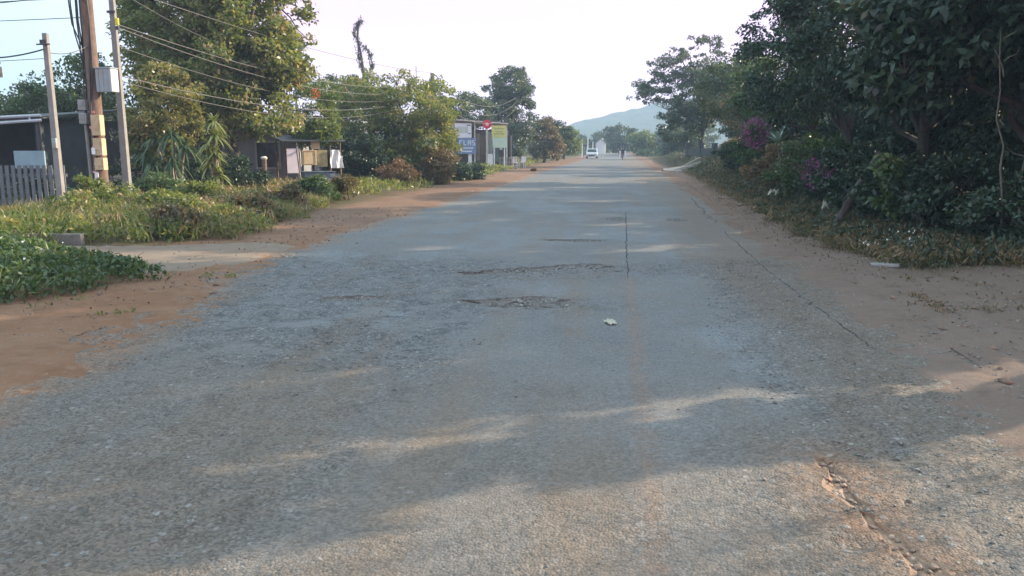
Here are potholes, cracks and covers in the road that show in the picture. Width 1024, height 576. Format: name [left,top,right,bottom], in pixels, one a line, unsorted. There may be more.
crack [691,198,874,349]
pothole [457,263,614,276]
pothole [455,296,576,309]
